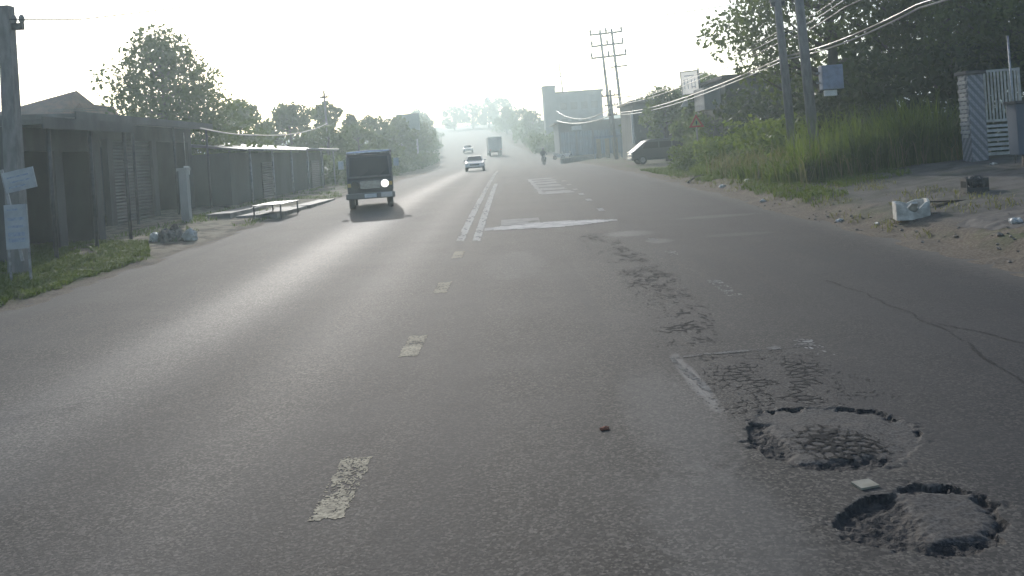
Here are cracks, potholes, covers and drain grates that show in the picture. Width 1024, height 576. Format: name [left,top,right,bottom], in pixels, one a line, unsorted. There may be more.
pothole [831,483,1011,559]
crack [826,280,1024,383]
pothole [745,406,924,472]
